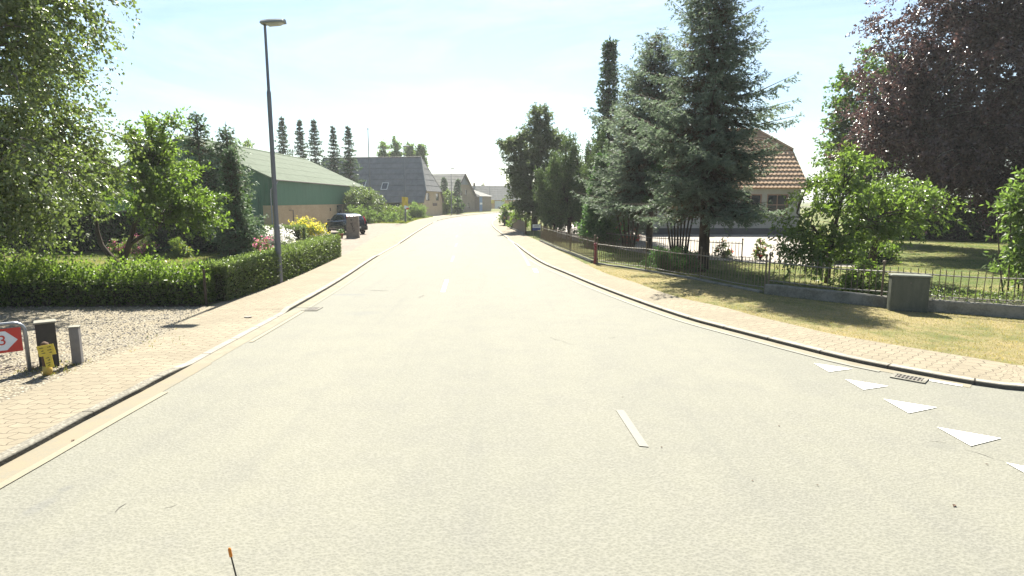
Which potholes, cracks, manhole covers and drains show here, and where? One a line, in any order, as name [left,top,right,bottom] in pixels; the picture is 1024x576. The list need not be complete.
drain grate [890,373,929,384]
